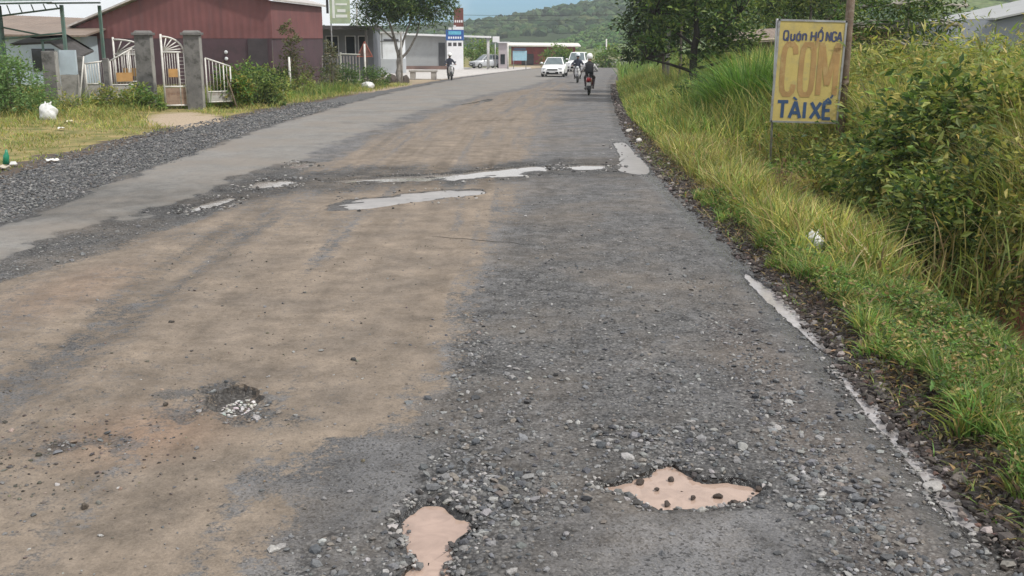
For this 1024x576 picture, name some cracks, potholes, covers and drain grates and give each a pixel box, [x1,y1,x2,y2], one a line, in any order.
pothole [395,494,481,576]
pothole [612,140,651,176]
pothole [181,195,244,215]
pothole [317,187,495,213]
pothole [592,461,775,513]
pothole [196,382,271,420]
pothole [310,162,566,184]
pothole [240,178,306,190]
pothole [550,163,622,171]
